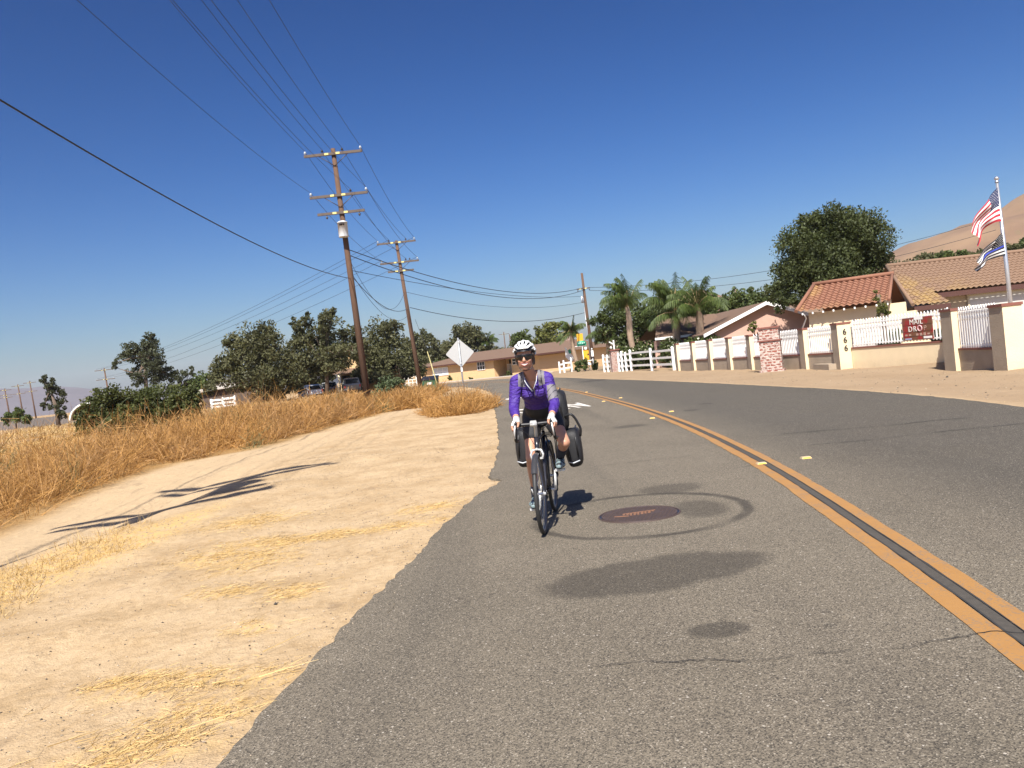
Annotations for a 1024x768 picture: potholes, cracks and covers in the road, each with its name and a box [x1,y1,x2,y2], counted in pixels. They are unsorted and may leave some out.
manhole cover [598,505,681,523]
